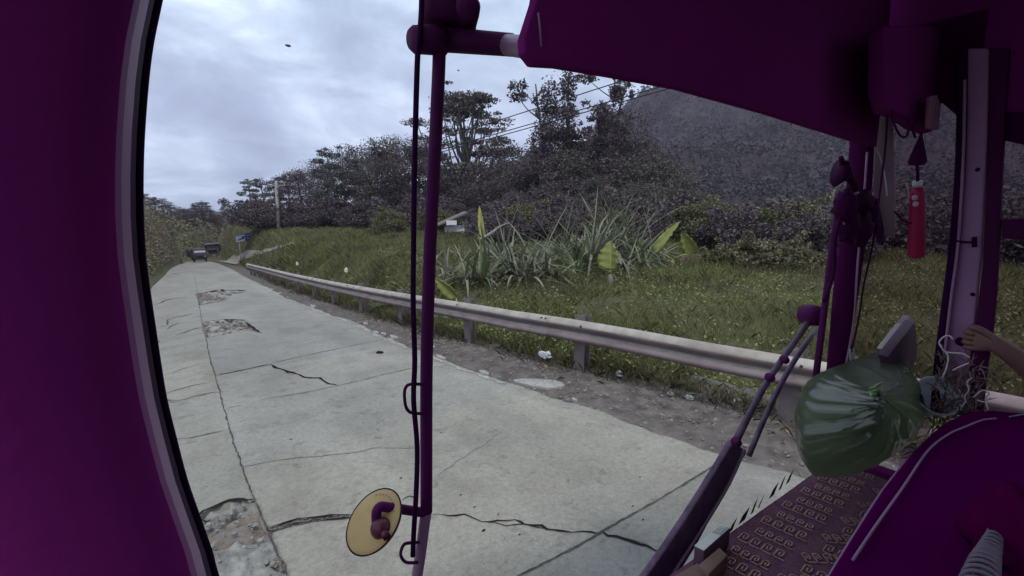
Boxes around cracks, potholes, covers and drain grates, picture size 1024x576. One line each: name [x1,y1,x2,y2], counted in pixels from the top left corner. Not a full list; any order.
pothole [203,320,254,338]
pothole [202,502,288,576]
crack [267,364,419,399]
pothole [200,498,255,514]
crack [442,513,657,551]
pothole [196,290,244,305]
